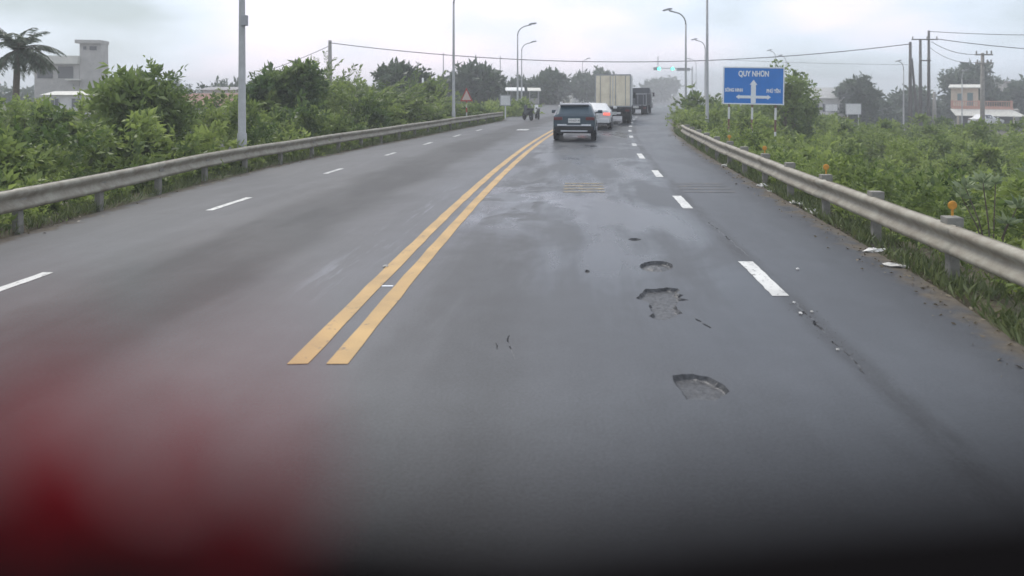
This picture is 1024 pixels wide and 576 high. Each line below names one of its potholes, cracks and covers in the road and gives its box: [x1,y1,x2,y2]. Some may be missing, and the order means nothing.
pothole [637,287,687,320]
pothole [673,374,729,401]
pothole [640,261,673,272]
